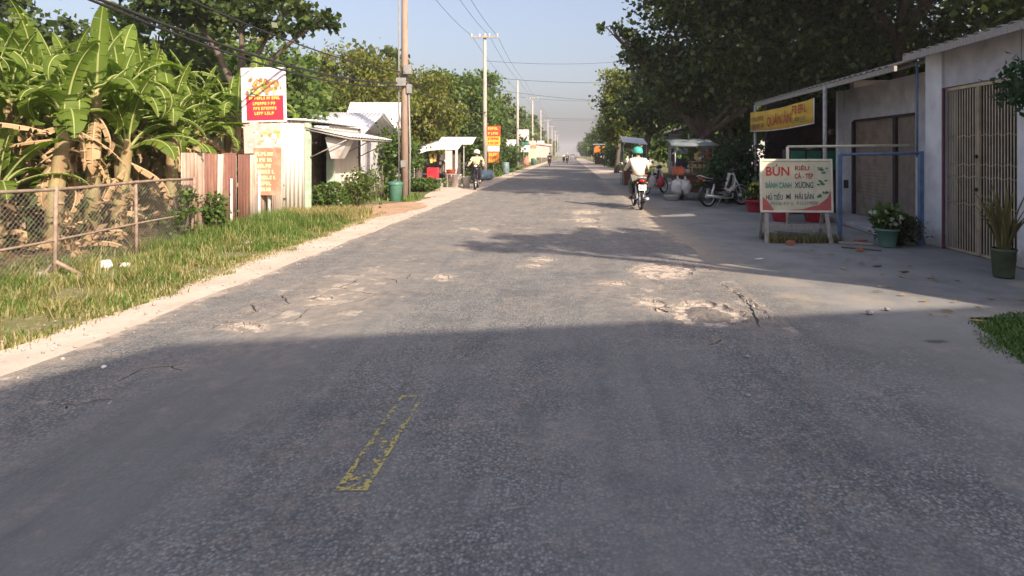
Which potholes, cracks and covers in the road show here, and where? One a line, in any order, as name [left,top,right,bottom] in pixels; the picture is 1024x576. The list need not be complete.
pothole [664,300,760,331]
pothole [625,261,702,282]
crack [704,281,779,349]
crack [36,358,196,421]
pothole [227,322,265,333]
crack [195,279,376,336]
pothole [635,298,669,314]
